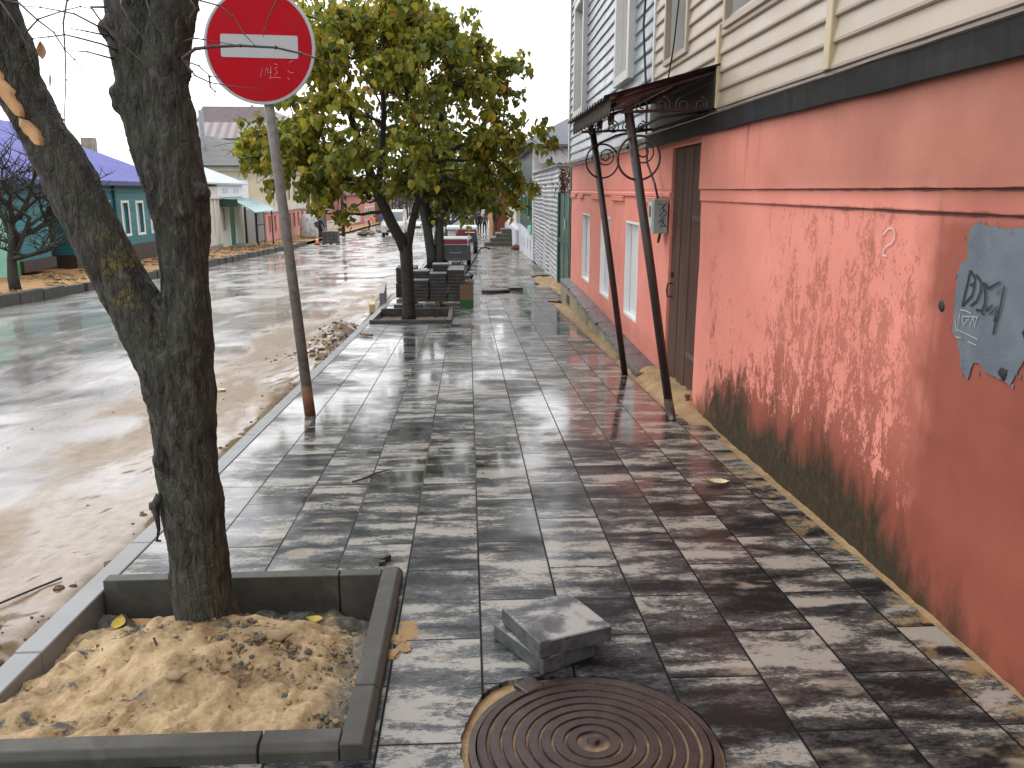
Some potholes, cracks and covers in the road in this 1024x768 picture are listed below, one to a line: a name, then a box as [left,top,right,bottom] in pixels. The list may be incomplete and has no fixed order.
manhole cover [460,676,726,768]
